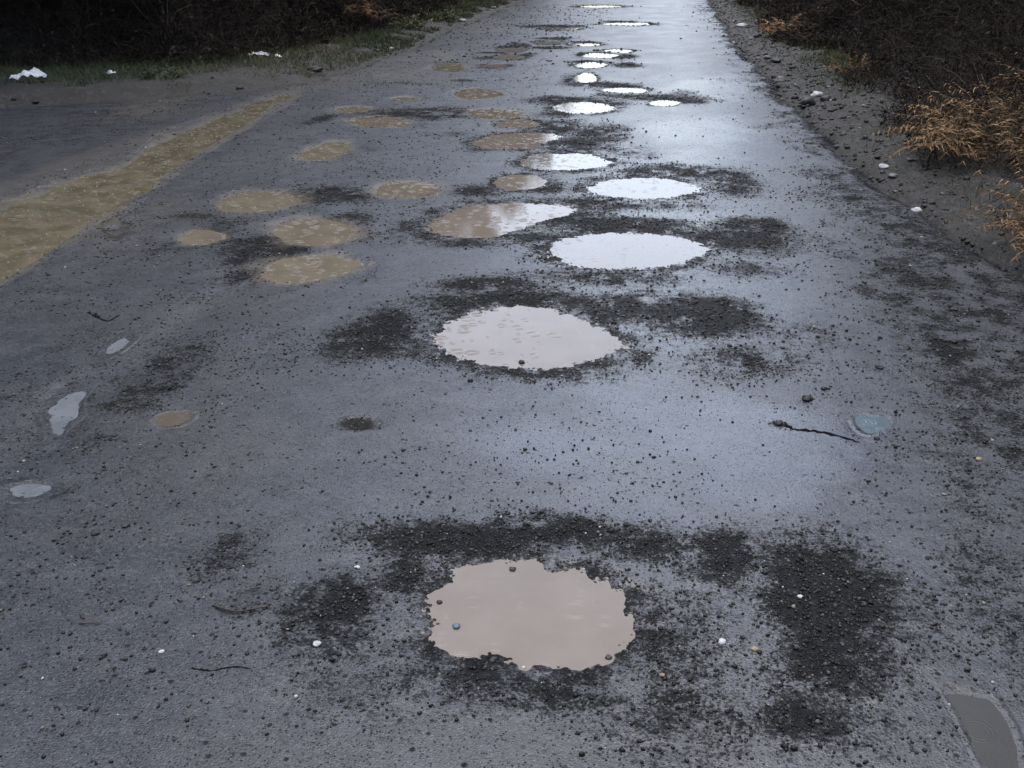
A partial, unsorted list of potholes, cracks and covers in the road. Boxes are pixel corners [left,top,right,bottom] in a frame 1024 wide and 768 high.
pothole [459,130,575,152]
pothole [507,151,624,172]
pothole [408,298,648,377]
pothole [247,251,376,287]
pothole [292,140,356,162]
